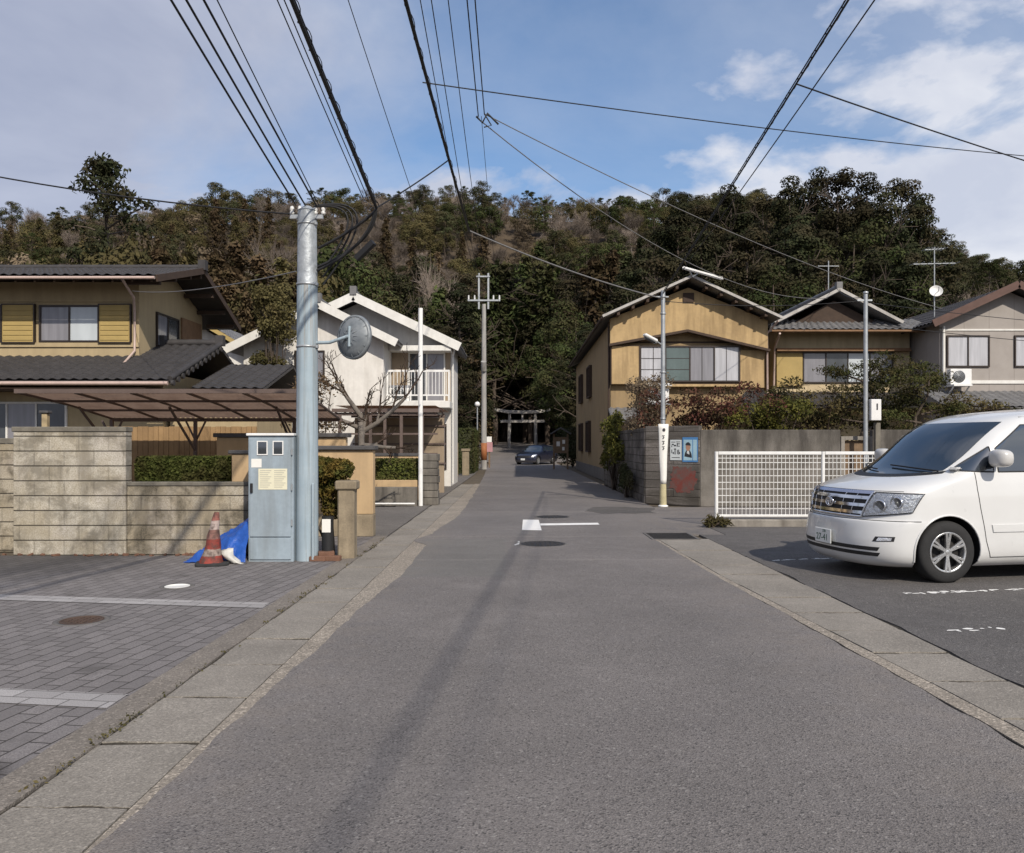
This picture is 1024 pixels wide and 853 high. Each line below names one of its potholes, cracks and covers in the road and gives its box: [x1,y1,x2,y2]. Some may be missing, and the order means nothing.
manhole cover [52,615,111,626]
drain grate [643,532,701,540]
